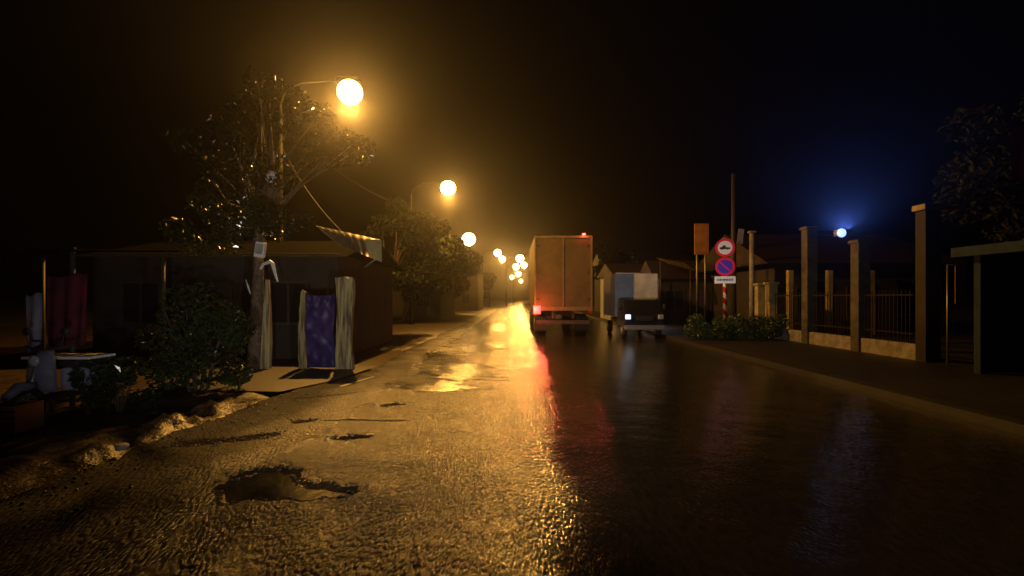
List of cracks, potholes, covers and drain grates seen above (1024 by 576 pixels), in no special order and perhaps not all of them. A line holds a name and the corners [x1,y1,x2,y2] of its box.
pothole [165,432,282,447]
pothole [213,465,359,506]
